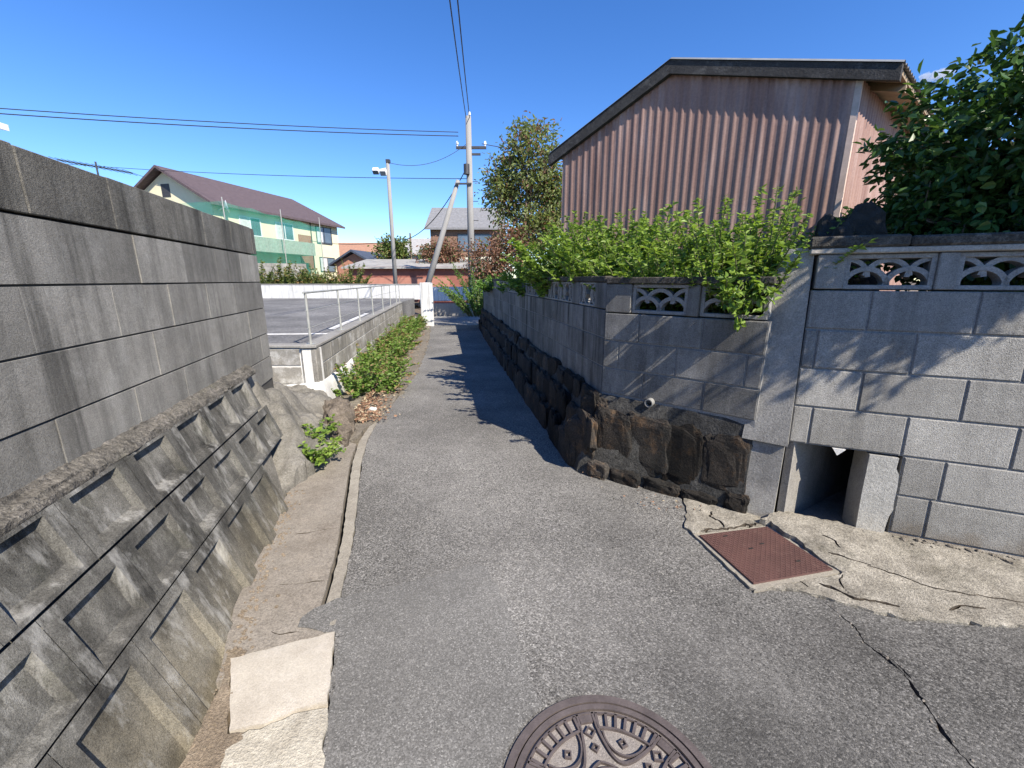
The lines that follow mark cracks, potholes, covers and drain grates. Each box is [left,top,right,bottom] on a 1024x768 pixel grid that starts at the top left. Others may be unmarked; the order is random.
crack [701,511,759,533]
crack [800,535,1023,768]
manhole cover [505,695,712,768]
